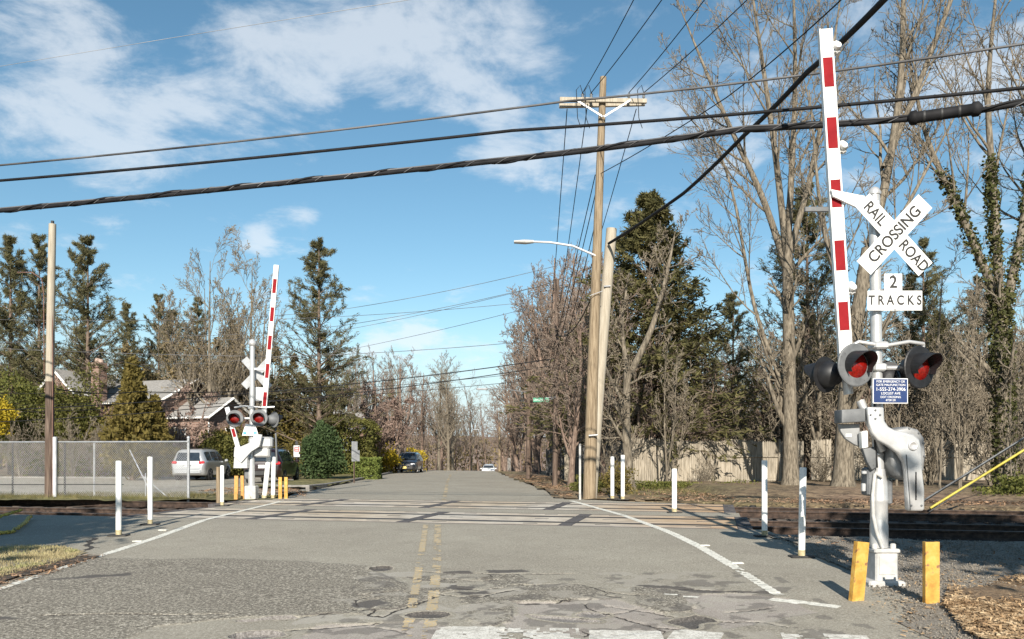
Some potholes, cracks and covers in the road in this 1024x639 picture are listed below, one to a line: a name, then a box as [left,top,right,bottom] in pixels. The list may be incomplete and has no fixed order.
crack [83,538,99,550]
crack [286,572,681,634]
pothole [399,610,456,620]
